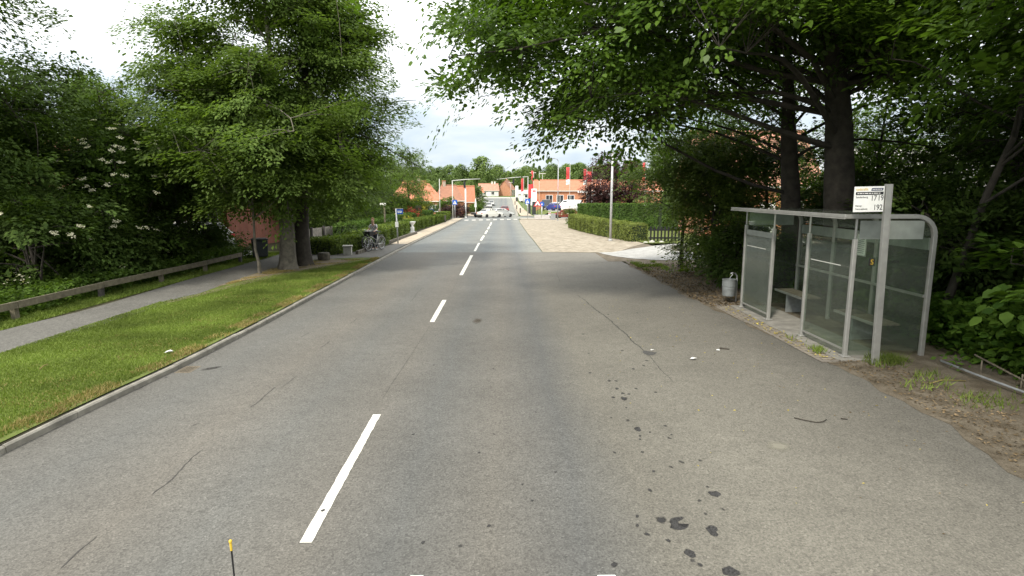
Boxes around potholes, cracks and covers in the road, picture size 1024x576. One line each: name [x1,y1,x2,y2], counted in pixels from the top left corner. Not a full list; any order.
crack [579,296,643,350]
